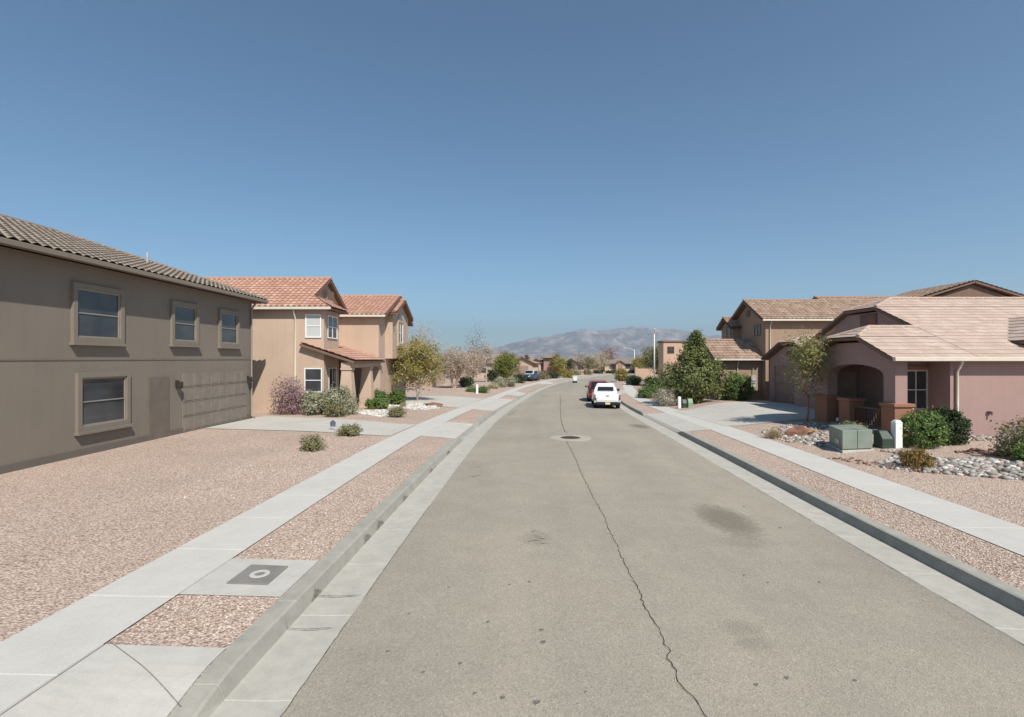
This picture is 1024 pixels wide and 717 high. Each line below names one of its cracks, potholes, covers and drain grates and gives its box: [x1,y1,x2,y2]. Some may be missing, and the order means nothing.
crack [566,441,707,717]
